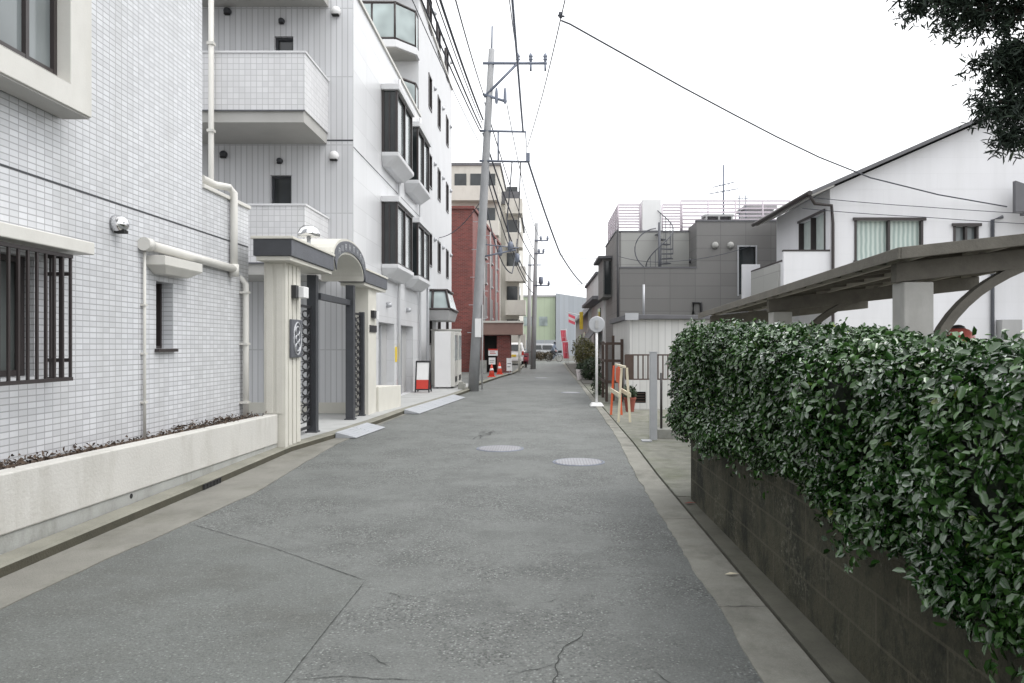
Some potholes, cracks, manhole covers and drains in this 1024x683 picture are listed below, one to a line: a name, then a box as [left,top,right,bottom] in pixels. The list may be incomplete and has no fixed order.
crack [510,631,584,683]
crack [196,525,422,683]
manhole cover [553,458,605,466]
drain grate [203,477,222,490]
